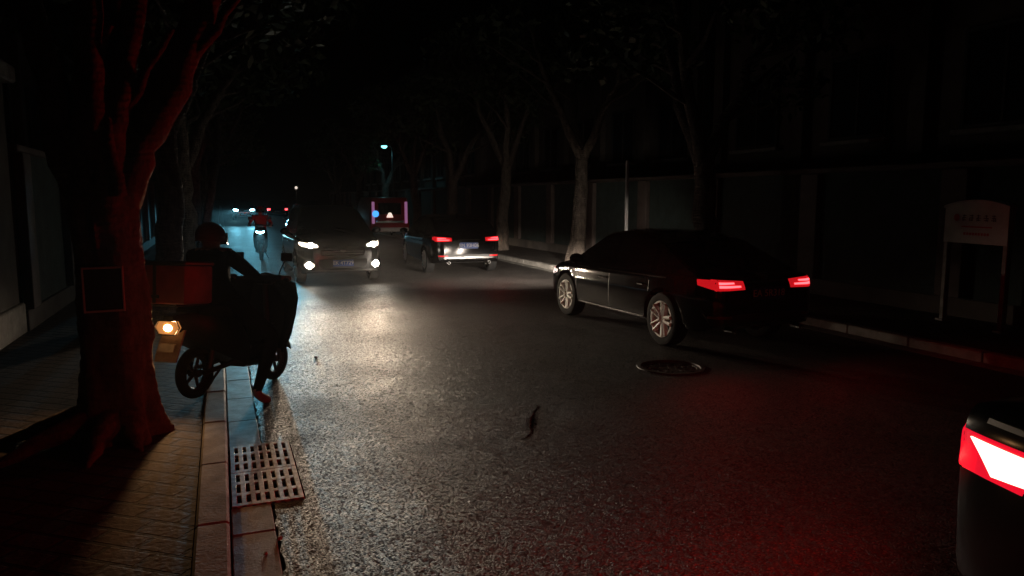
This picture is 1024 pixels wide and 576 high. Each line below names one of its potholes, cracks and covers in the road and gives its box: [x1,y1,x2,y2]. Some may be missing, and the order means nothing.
drain grate [229,440,305,510]
crack [522,405,540,439]
manhole cover [637,359,705,375]
